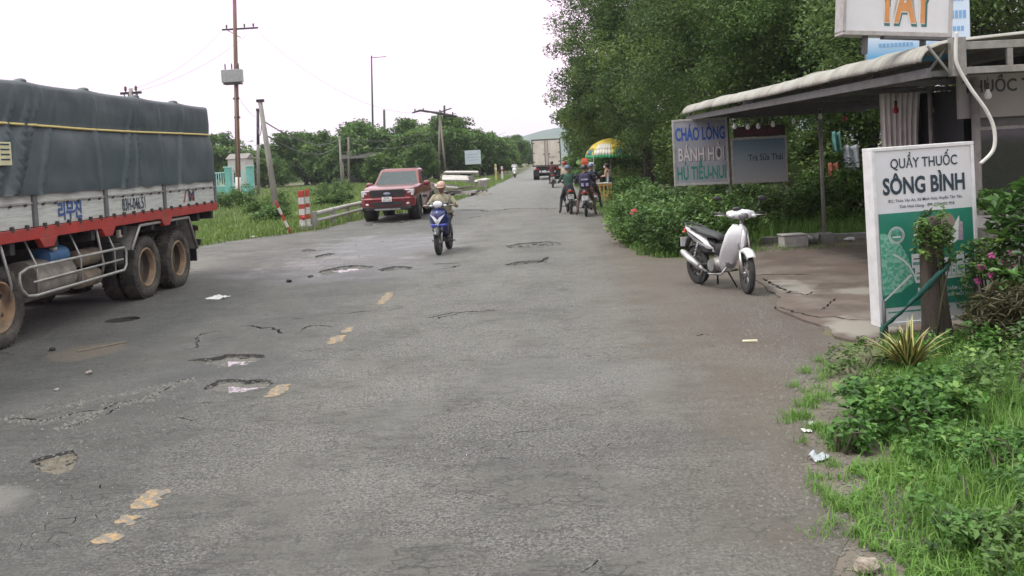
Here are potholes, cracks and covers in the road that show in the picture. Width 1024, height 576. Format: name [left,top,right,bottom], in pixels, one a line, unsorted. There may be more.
crack [250,318,324,334]
pothole [506,241,562,249]
crack [19,468,114,550]
pothole [30,450,78,474]
crack [429,310,494,320]
pothole [320,265,374,275]
crack [1,379,186,427]
pothole [506,257,549,266]
crack [762,274,859,320]
pothole [204,378,273,393]
pothole [188,354,267,367]
